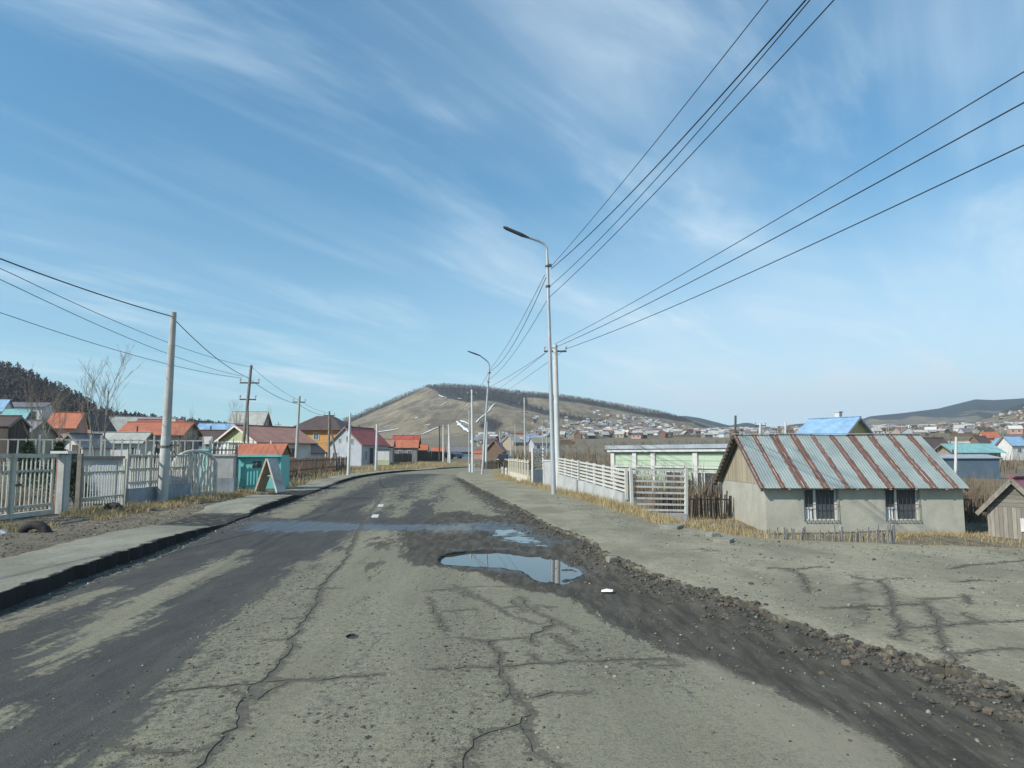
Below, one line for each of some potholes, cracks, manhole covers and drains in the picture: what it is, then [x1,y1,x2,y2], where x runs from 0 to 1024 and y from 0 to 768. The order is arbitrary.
pothole [436,549,579,585]
crack [844,561,1024,664]
crack [114,491,386,768]
crack [429,585,682,768]
crack [772,567,812,592]
